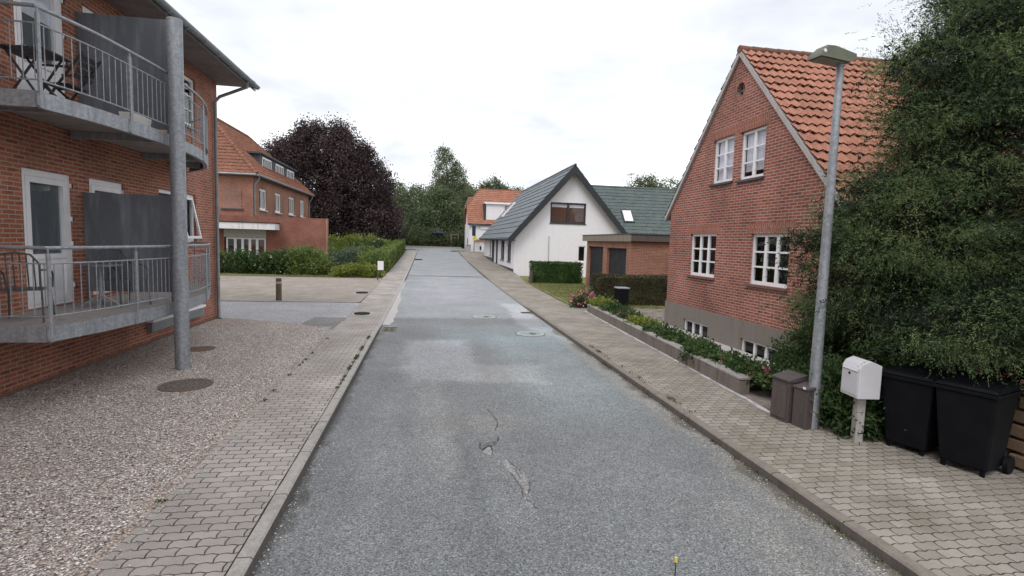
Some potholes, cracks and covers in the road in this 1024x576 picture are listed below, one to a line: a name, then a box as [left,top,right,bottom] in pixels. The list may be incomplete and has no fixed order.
crack [479,409,537,508]
manhole cover [158,378,214,392]
